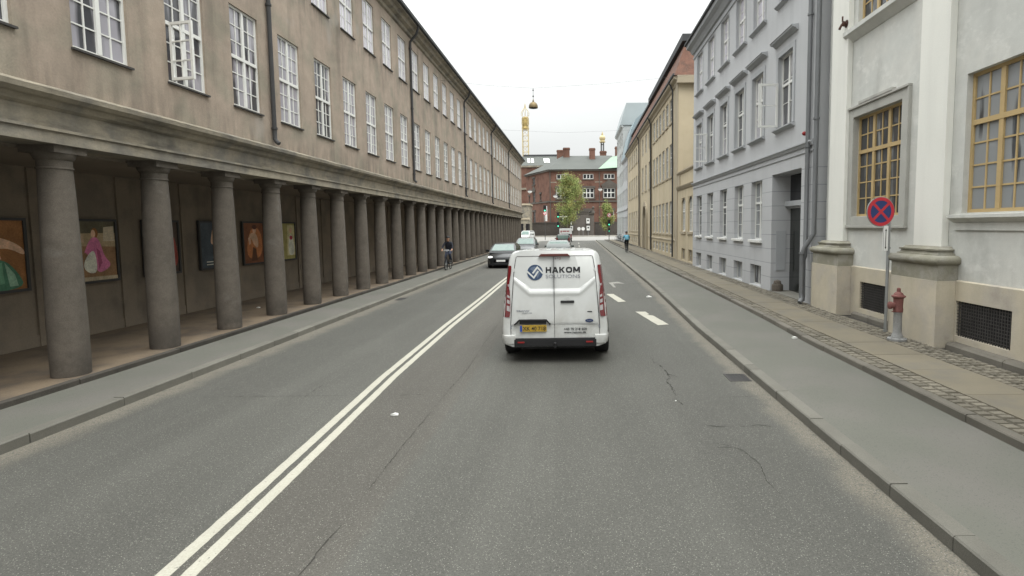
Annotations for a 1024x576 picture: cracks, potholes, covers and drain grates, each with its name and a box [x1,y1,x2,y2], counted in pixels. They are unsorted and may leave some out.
crack [708,425,772,486]
